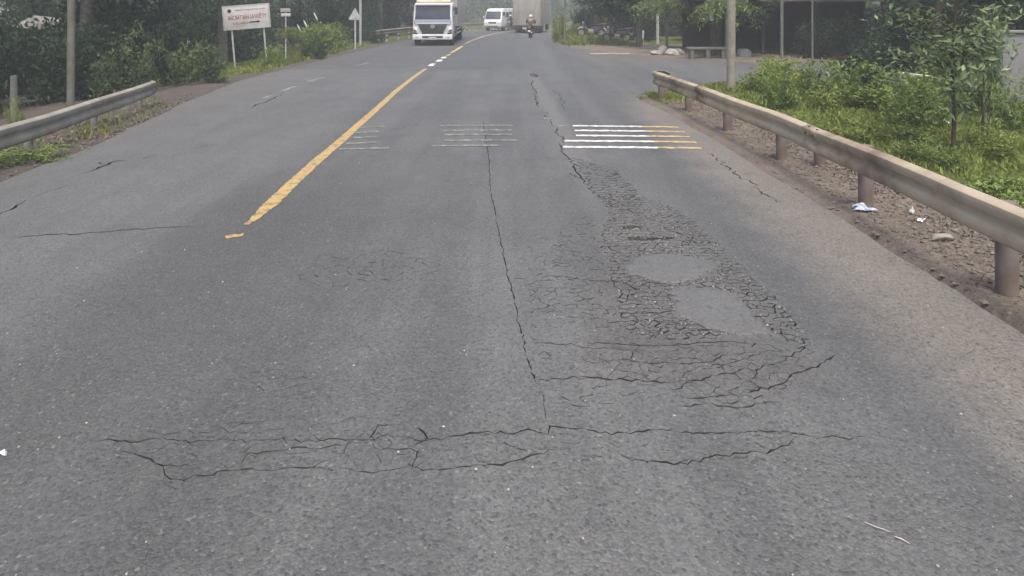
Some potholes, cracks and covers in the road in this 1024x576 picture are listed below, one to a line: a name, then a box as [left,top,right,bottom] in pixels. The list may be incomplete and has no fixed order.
crack [531,81,586,185]
crack [14,226,191,238]
crack [90,121,866,490]
